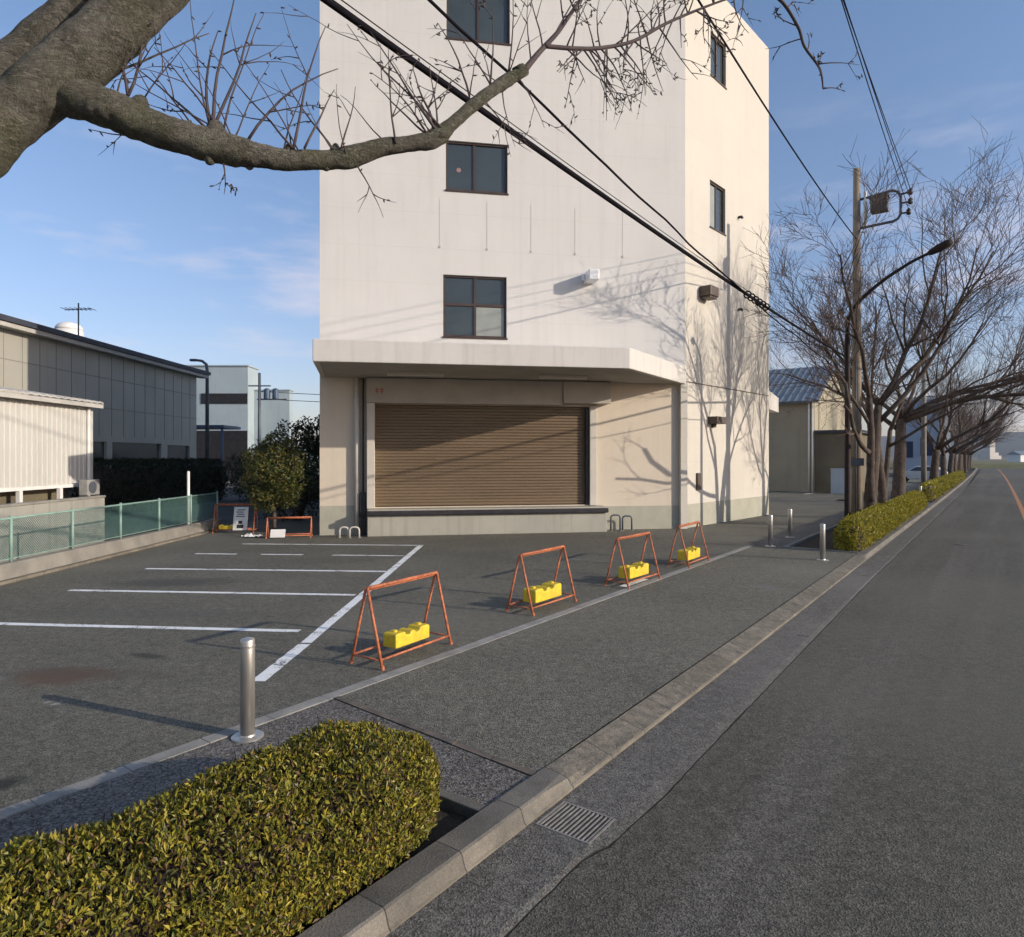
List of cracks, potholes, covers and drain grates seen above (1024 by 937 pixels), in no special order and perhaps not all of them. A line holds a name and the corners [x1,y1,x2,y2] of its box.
drain grate [535,801,616,845]
